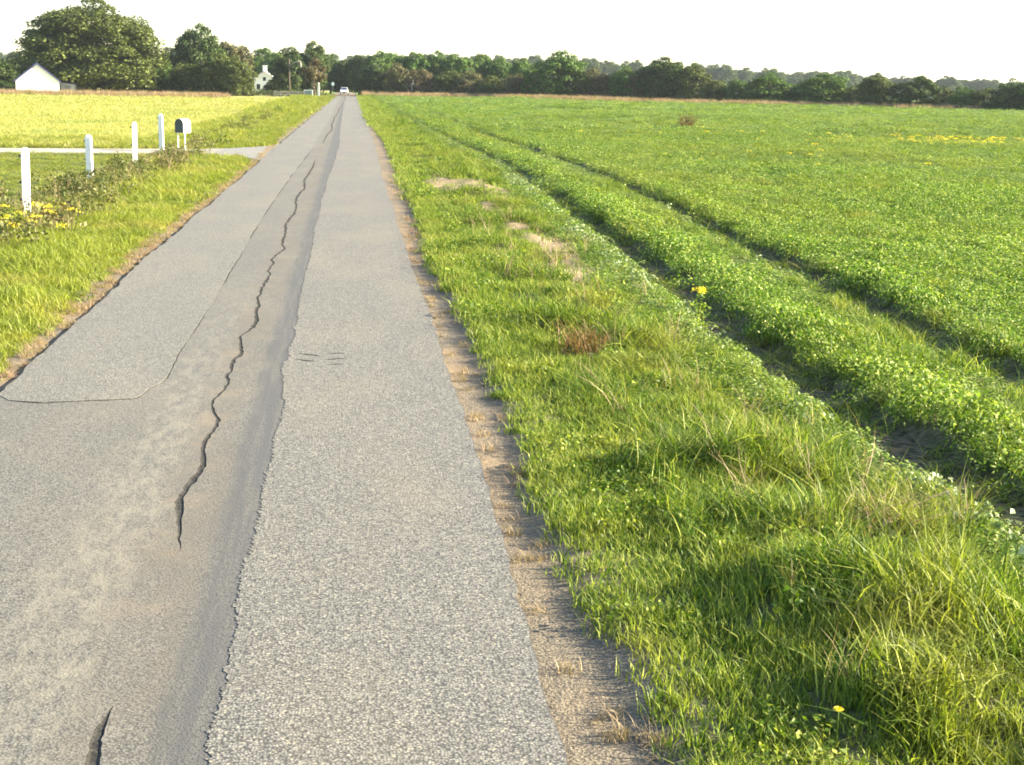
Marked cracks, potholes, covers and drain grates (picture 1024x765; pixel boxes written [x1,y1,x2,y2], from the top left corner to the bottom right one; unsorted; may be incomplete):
crack [174,160,344,550]
crack [85,707,113,765]
